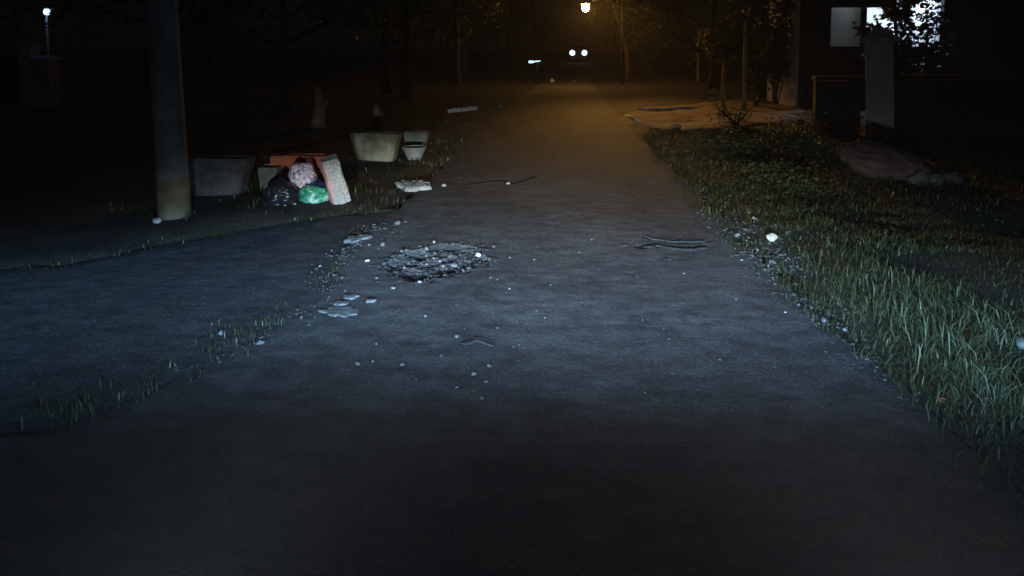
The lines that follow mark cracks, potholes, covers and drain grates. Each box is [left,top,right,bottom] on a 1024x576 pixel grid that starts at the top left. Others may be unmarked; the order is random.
crack [620,235,708,260]
crack [462,176,539,186]
crack [461,337,496,347]
pothole [369,241,500,287]
